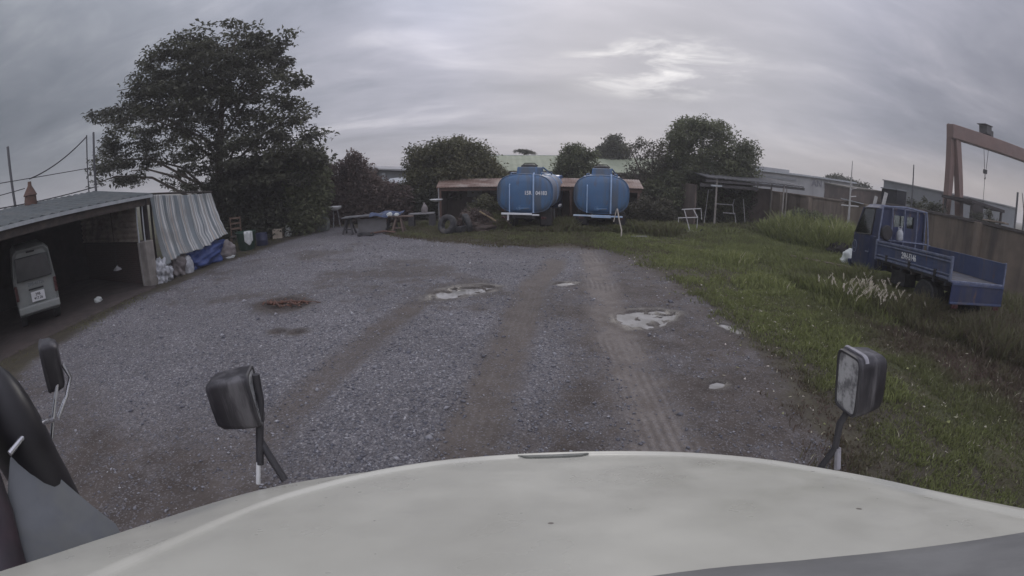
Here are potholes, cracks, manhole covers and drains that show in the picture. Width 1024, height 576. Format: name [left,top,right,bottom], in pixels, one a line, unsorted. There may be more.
pothole [611,307,686,331]
pothole [418,283,503,302]
pothole [711,320,752,336]
